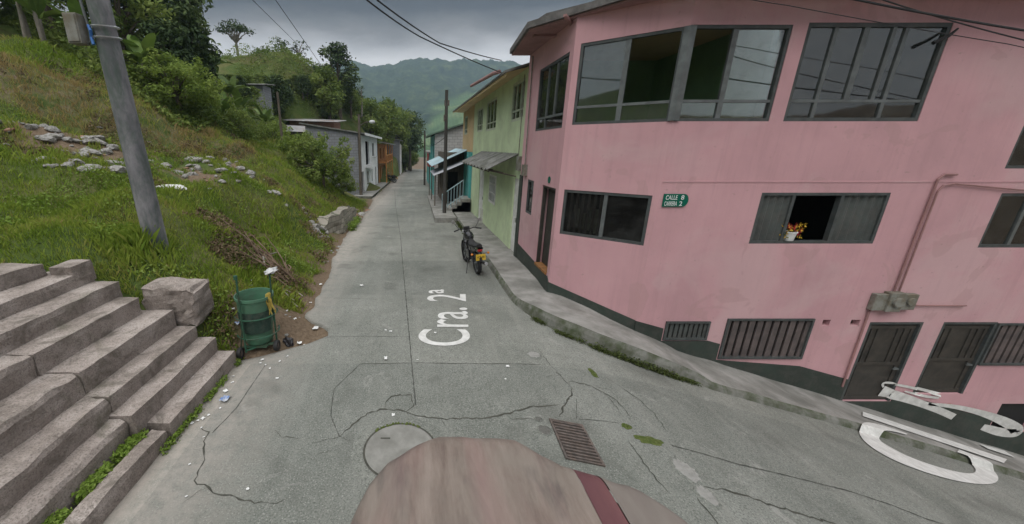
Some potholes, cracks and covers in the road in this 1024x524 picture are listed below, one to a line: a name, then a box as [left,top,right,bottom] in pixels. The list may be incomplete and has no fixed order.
crack [697,486,835,524]
crack [181,428,285,504]
drain grate [549,418,606,467]
crack [275,357,665,454]
manhole cover [351,416,445,485]
